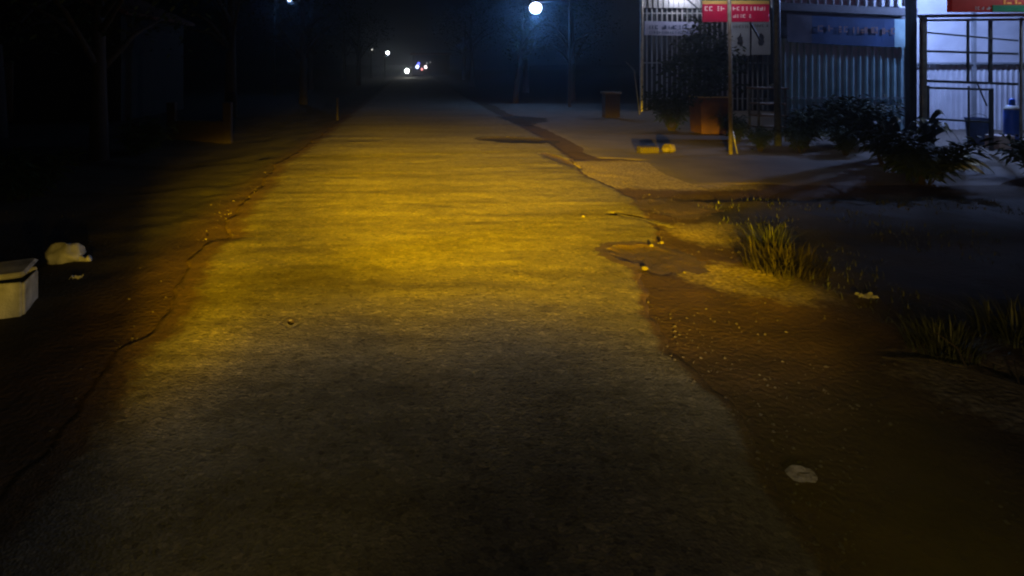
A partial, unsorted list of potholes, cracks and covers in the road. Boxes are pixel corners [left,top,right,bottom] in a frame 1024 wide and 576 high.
pothole [594,241,711,279]
